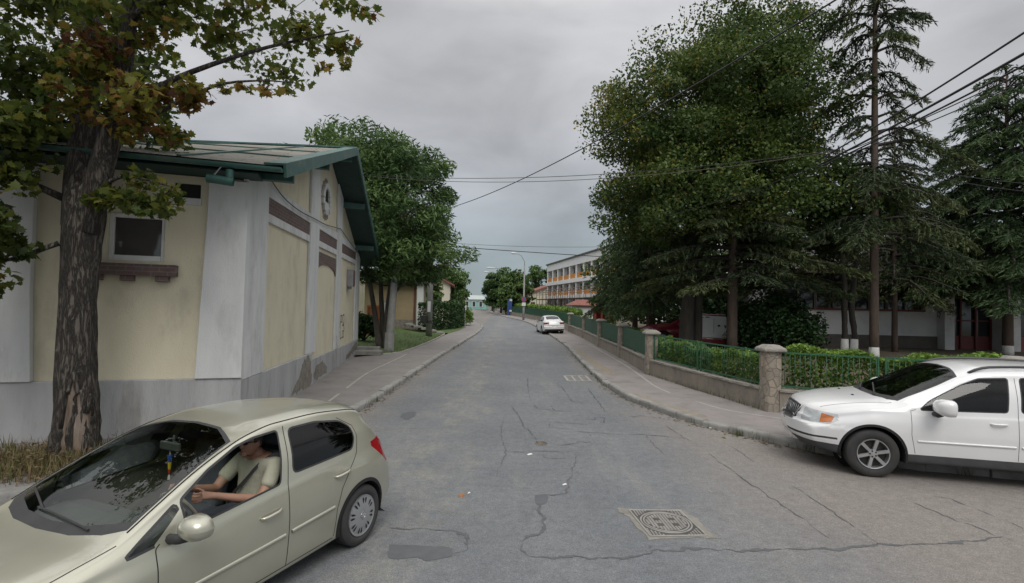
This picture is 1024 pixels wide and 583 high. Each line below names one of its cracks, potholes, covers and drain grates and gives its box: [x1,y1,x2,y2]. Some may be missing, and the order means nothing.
manhole cover [617,507,718,540]
crack [713,449,873,544]
crack [495,386,689,540]
